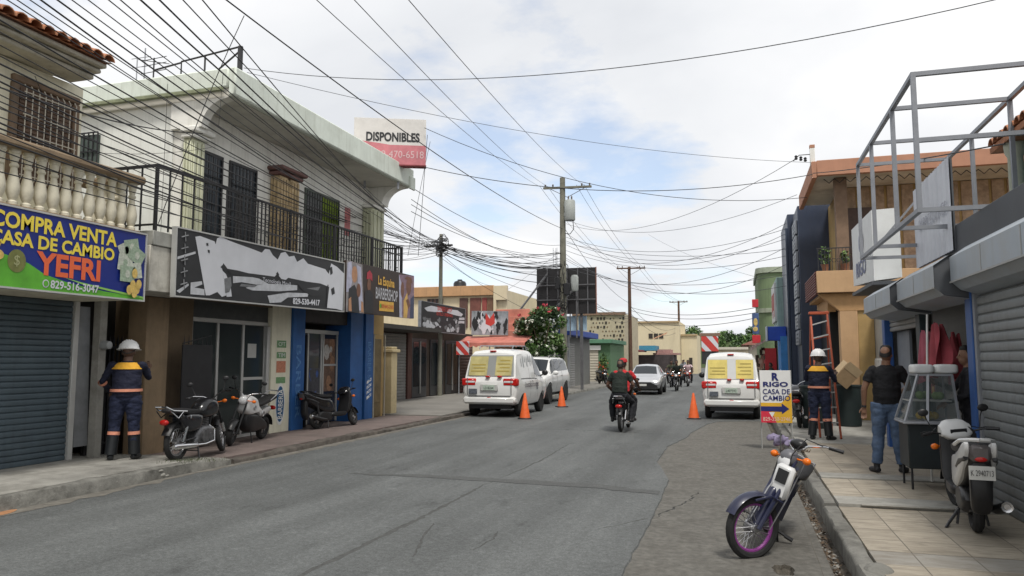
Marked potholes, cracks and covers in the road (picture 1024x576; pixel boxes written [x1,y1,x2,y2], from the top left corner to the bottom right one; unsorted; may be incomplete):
crack [600,492,699,529]
